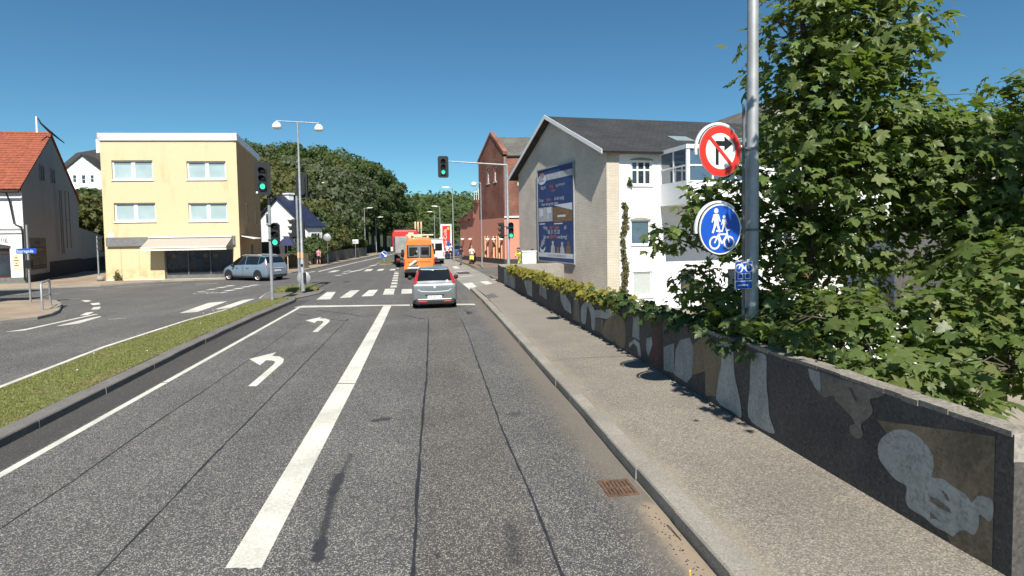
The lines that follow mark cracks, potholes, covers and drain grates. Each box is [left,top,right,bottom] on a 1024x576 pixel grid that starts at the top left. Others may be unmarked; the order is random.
drain grate [598,478,640,498]
